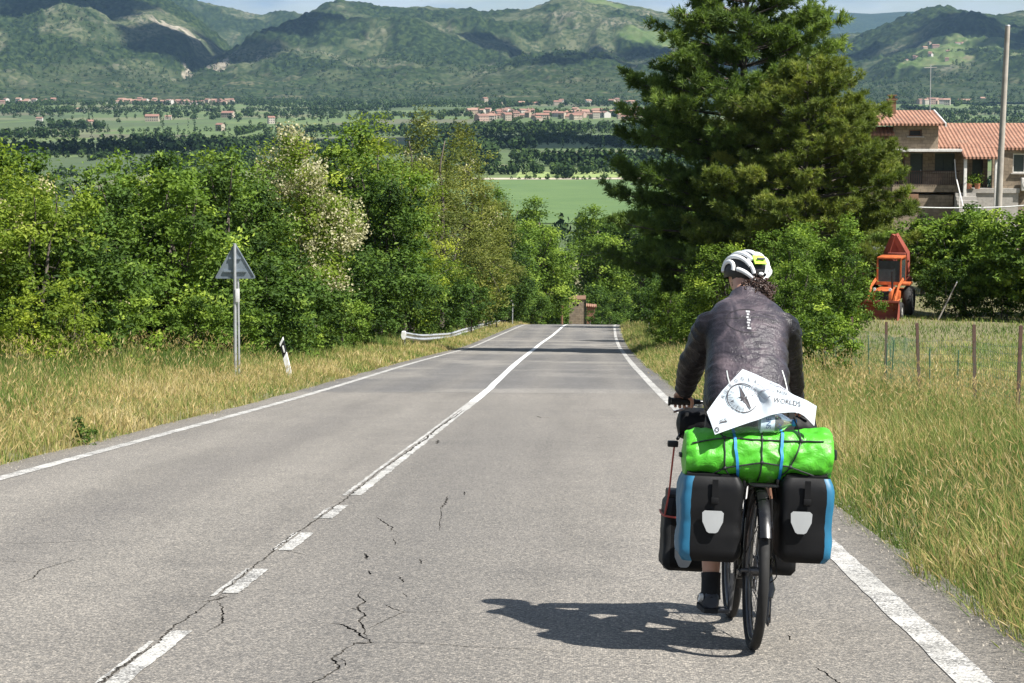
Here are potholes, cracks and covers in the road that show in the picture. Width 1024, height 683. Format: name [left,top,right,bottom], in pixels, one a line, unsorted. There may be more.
crack [99,410,464,683]
crack [312,559,555,683]
